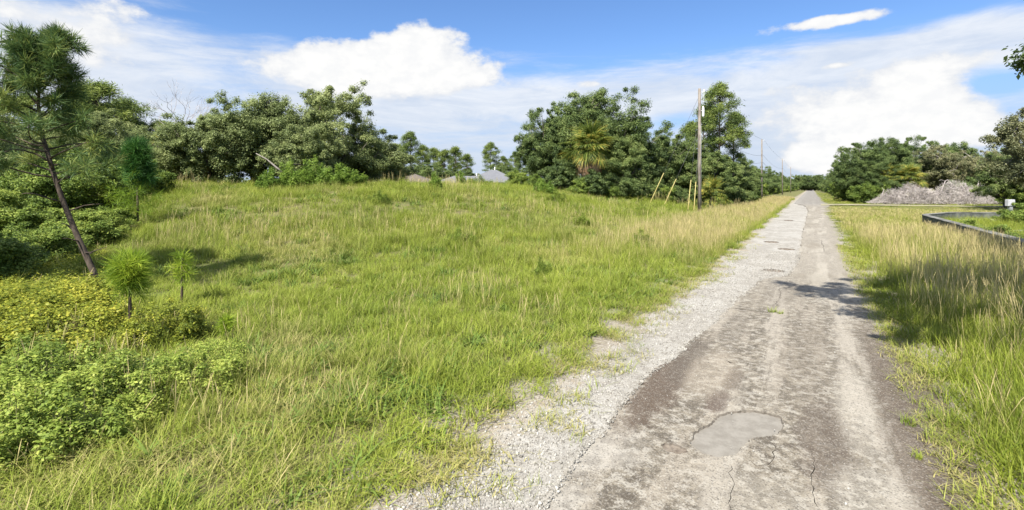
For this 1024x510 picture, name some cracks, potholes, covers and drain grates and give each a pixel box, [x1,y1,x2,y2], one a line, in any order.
pothole [689,410,784,457]
